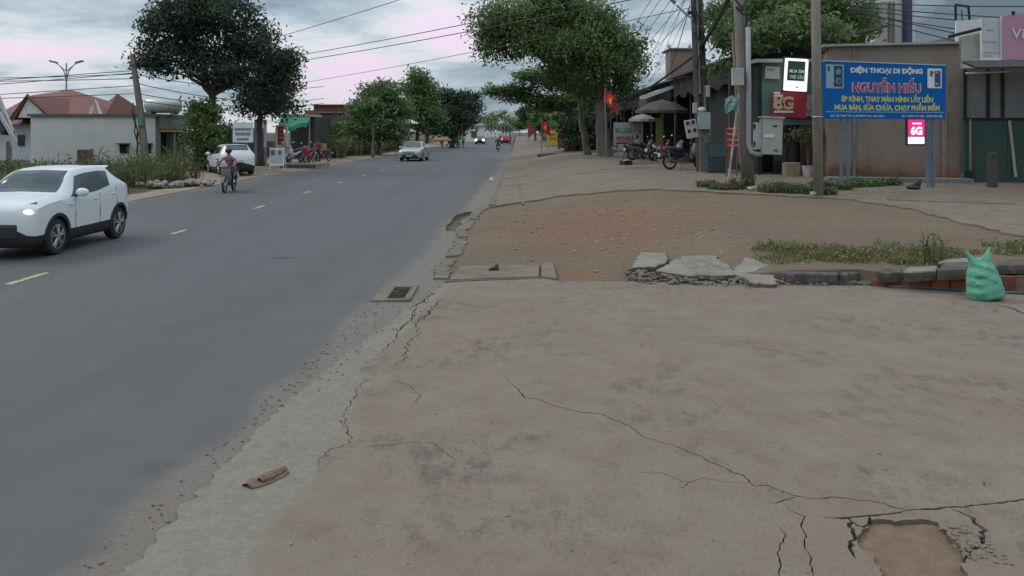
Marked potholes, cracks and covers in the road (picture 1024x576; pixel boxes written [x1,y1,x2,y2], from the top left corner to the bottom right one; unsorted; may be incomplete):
manhole cover [446,262,557,282]
crack [507,378,1024,576]
crack [382,293,442,366]
drain grate [371,285,419,302]
crack [316,379,456,474]
pothole [857,519,968,576]
